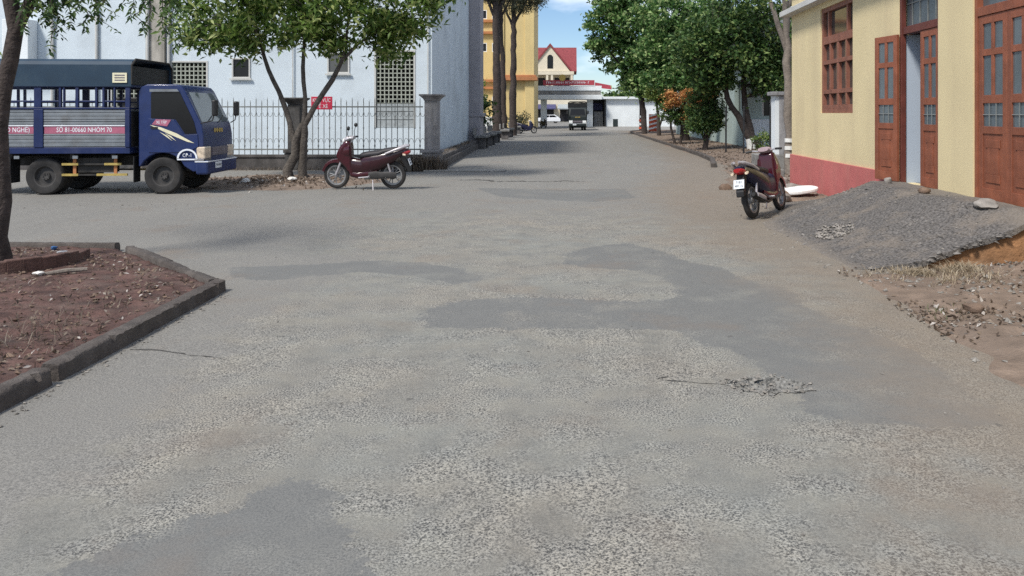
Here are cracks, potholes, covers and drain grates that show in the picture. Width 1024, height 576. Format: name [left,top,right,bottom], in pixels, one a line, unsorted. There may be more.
crack [129,349,222,359]
pothole [719,373,816,397]
